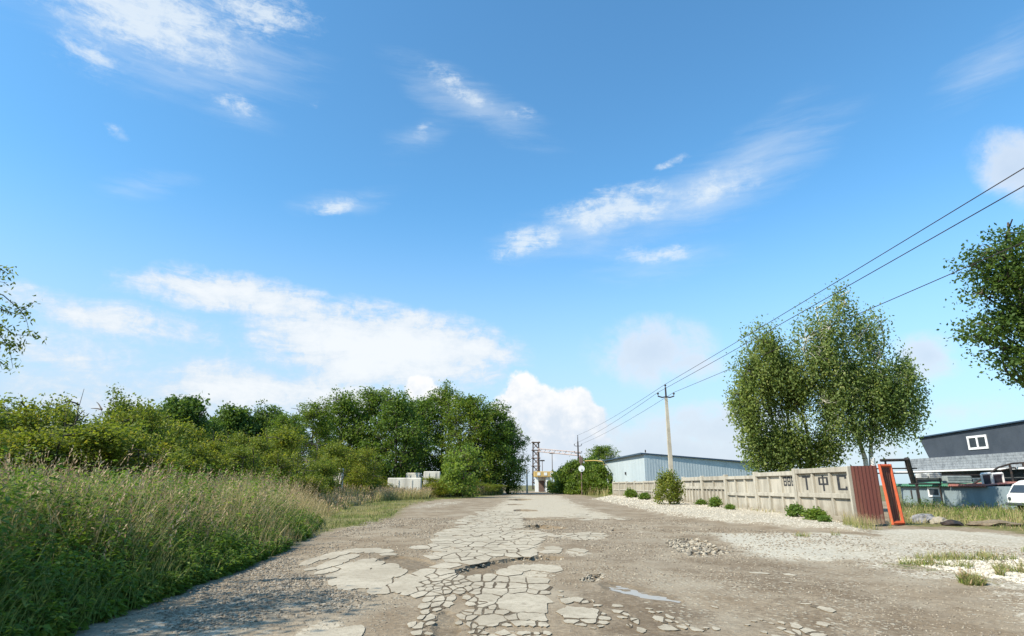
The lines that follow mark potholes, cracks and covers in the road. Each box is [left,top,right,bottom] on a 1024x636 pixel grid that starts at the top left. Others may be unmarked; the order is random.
crack [335,511,640,636]
pothole [598,581,686,603]
pothole [455,556,564,576]
